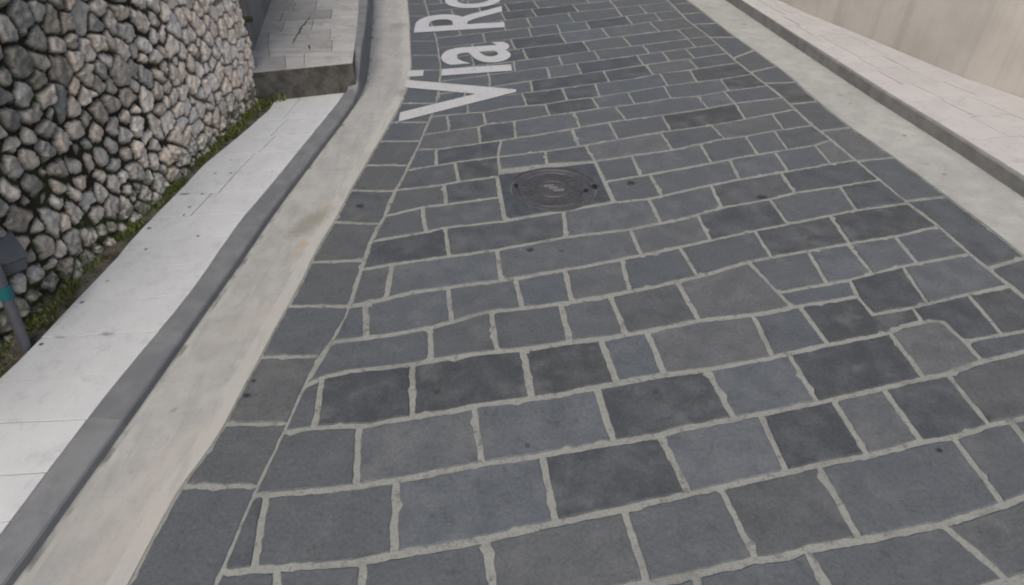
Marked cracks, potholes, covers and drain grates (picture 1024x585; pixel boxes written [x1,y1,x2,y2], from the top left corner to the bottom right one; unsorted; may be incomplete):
manhole cover [499,163,611,218]
